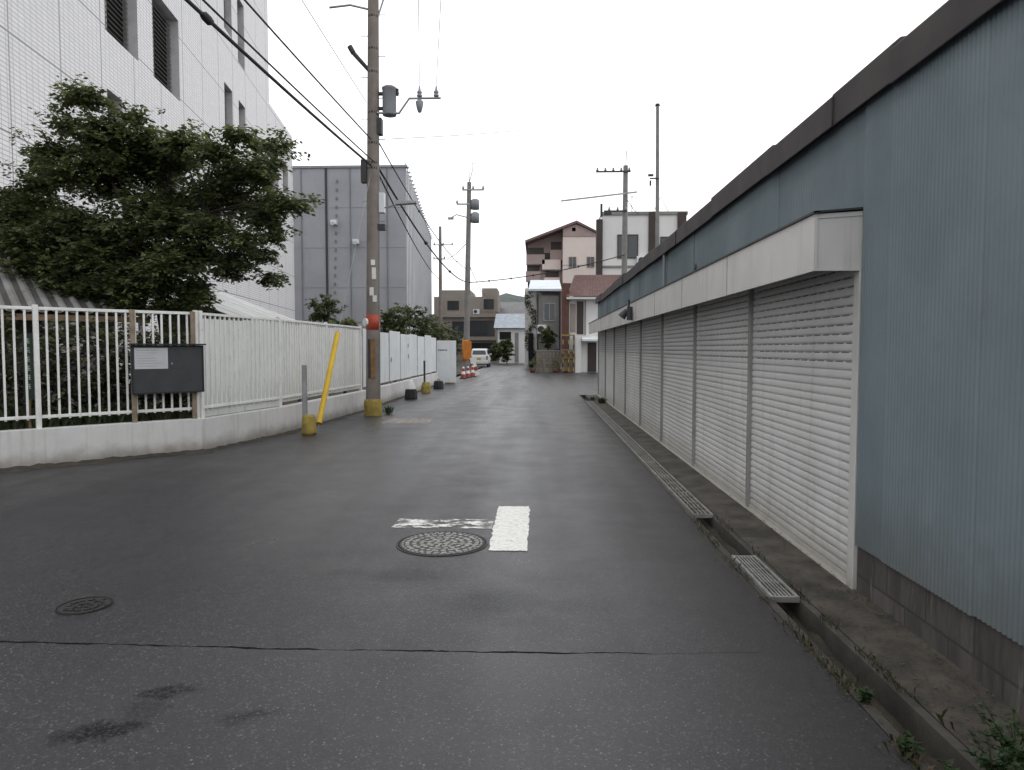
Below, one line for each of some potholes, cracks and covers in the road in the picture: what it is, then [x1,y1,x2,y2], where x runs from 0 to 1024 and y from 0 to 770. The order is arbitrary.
manhole cover [396,531,488,557]
crack [0,641,762,654]
drain grate [672,492,713,518]
manhole cover [55,596,114,615]
drain grate [656,475,689,493]
drain grate [643,461,671,476]
drain grate [633,451,657,462]
drain grate [731,555,800,603]
drain grate [625,442,645,452]
